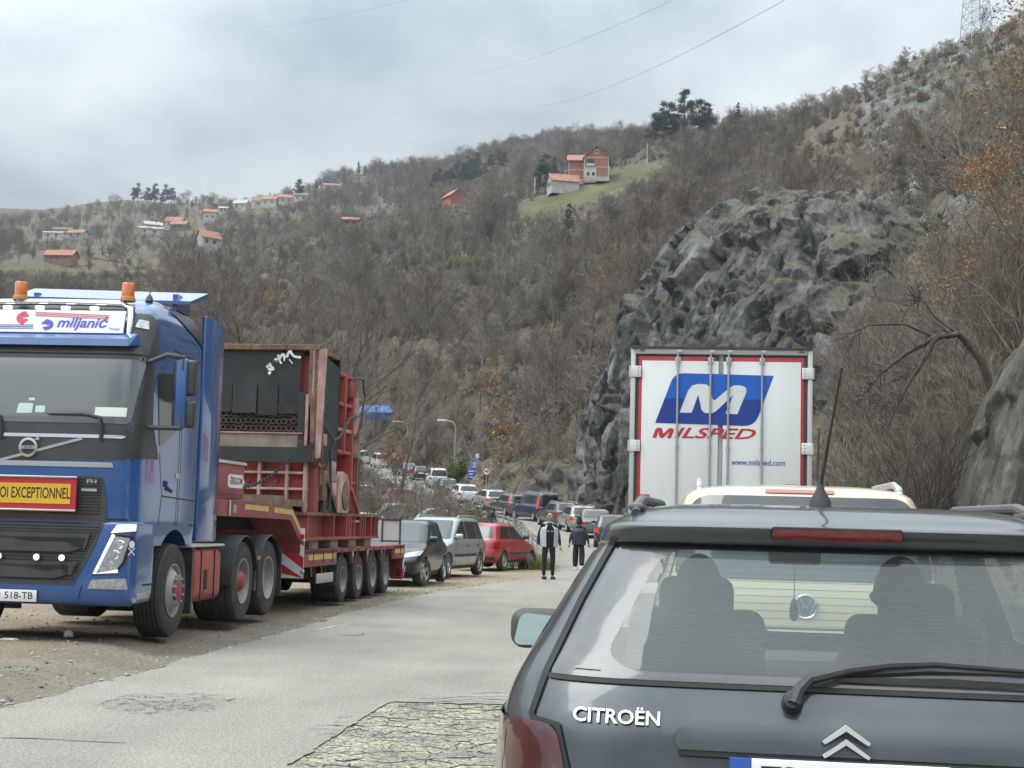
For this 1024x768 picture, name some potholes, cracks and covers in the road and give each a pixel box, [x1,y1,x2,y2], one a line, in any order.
crack [287,692,508,768]
